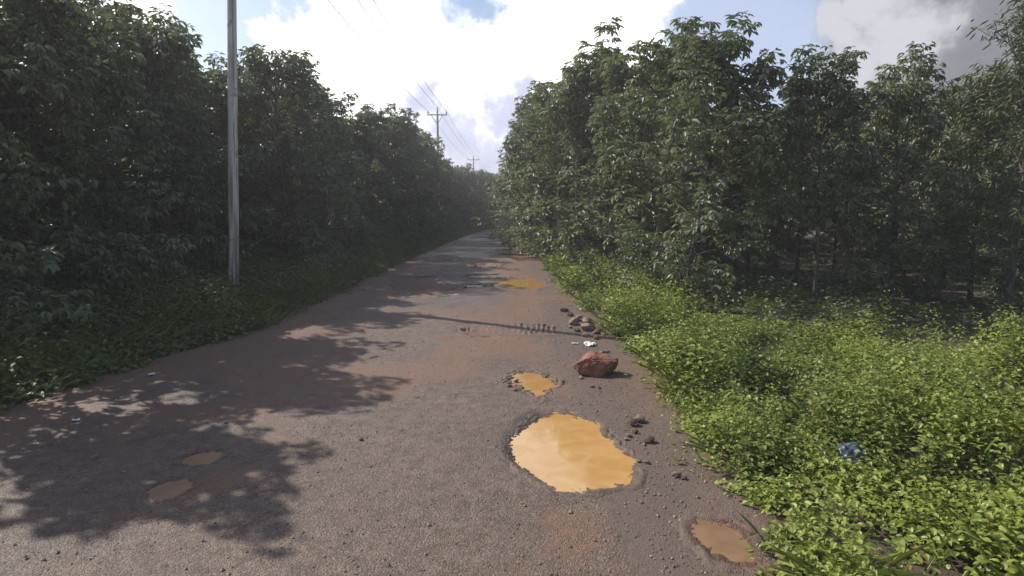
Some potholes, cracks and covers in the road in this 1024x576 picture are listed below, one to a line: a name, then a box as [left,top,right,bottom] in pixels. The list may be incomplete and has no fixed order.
pothole [498,409,648,499]
pothole [170,447,234,469]
pothole [498,367,568,404]
pothole [670,510,782,576]
pothole [484,277,553,290]
pothole [133,474,206,505]
